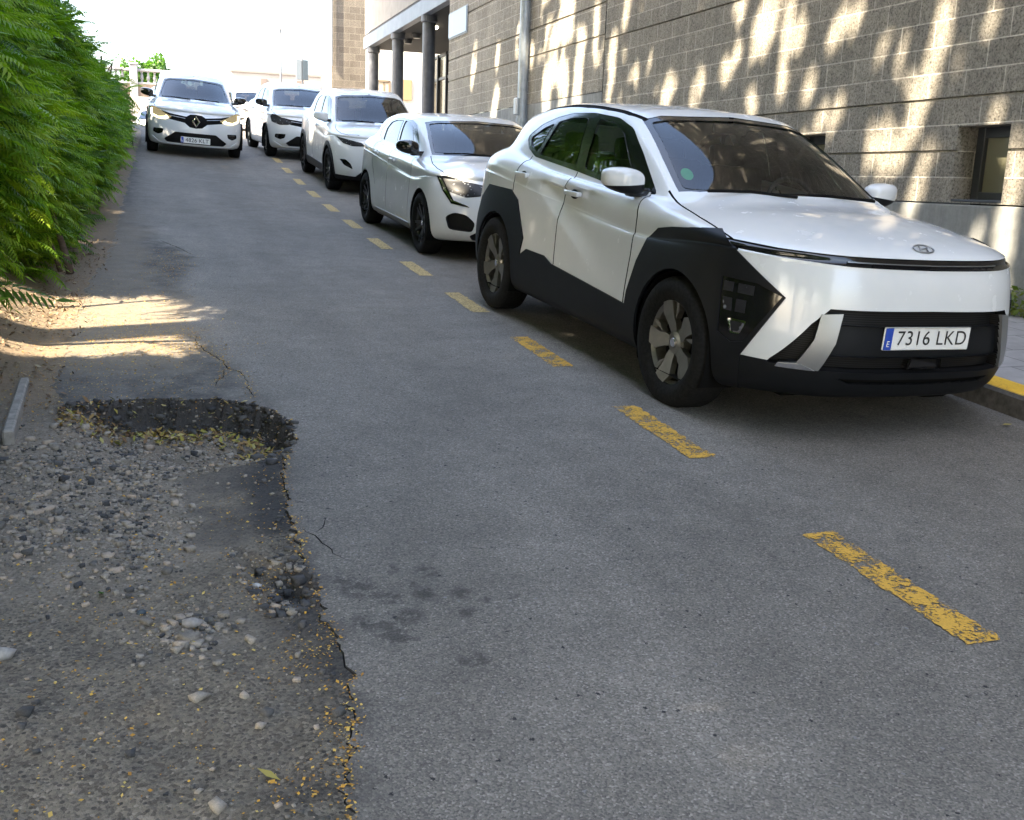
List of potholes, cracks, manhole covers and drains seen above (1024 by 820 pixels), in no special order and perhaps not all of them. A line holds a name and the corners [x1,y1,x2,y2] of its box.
crack [195,336,254,397]
pothole [52,397,299,476]
crack [283,463,345,564]
